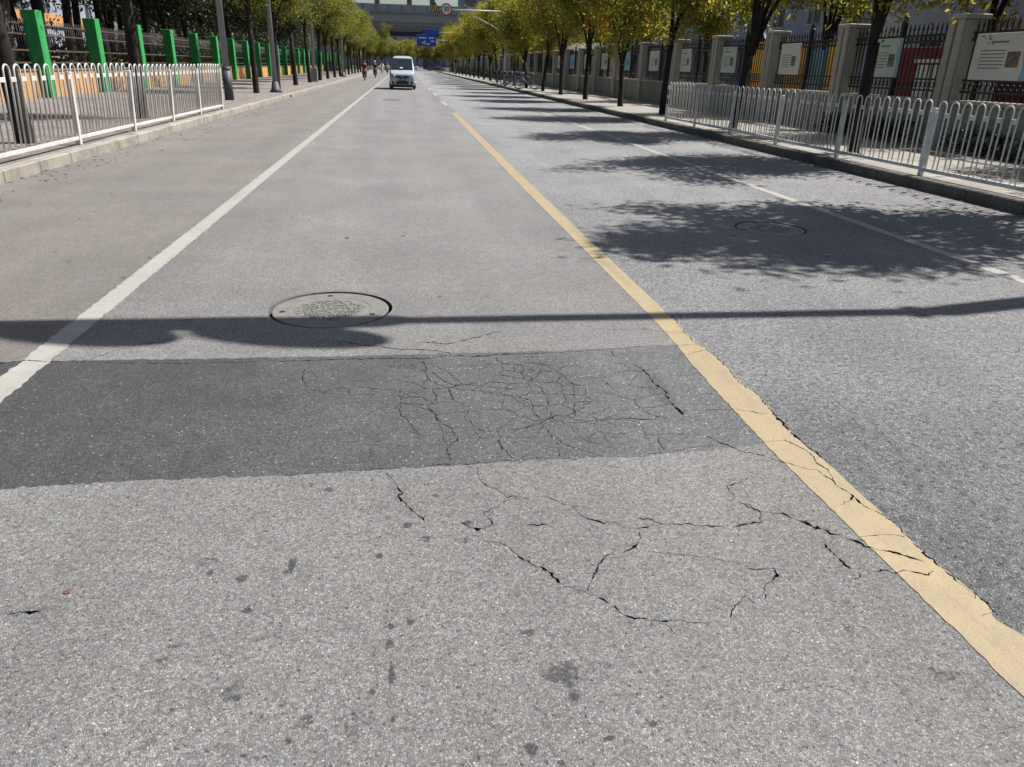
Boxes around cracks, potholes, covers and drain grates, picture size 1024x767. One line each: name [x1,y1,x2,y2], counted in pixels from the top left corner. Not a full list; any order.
manhole cover [732,221,809,236]
crack [385,472,425,522]
manhole cover [265,291,395,329]
crack [334,331,683,461]
crack [463,311,995,634]
